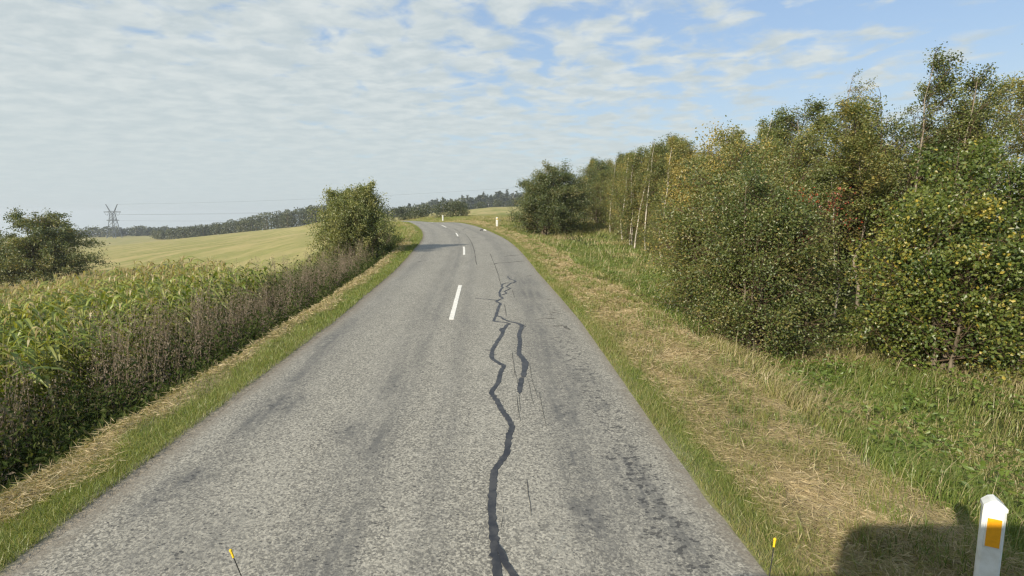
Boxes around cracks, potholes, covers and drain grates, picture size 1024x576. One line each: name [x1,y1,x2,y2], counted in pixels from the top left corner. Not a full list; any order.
crack [512,353,546,424]
crack [455,229,531,315]
